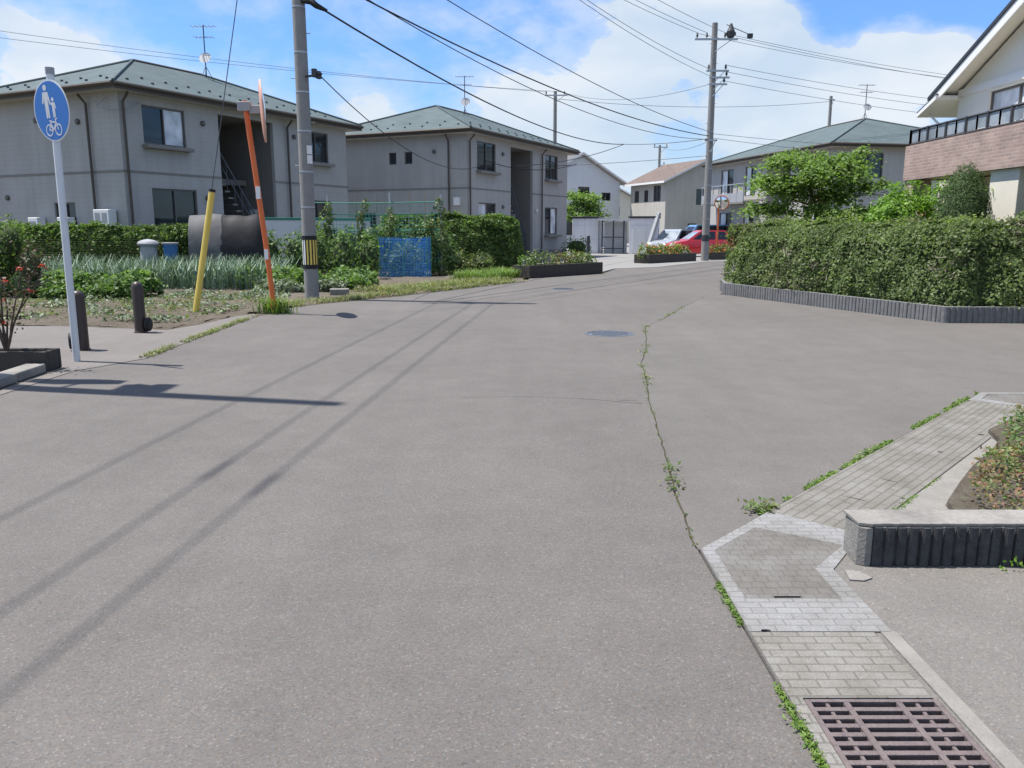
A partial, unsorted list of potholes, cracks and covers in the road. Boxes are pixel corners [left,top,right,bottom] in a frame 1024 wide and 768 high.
drain grate [804,699,999,768]
crack [640,315,695,547]
